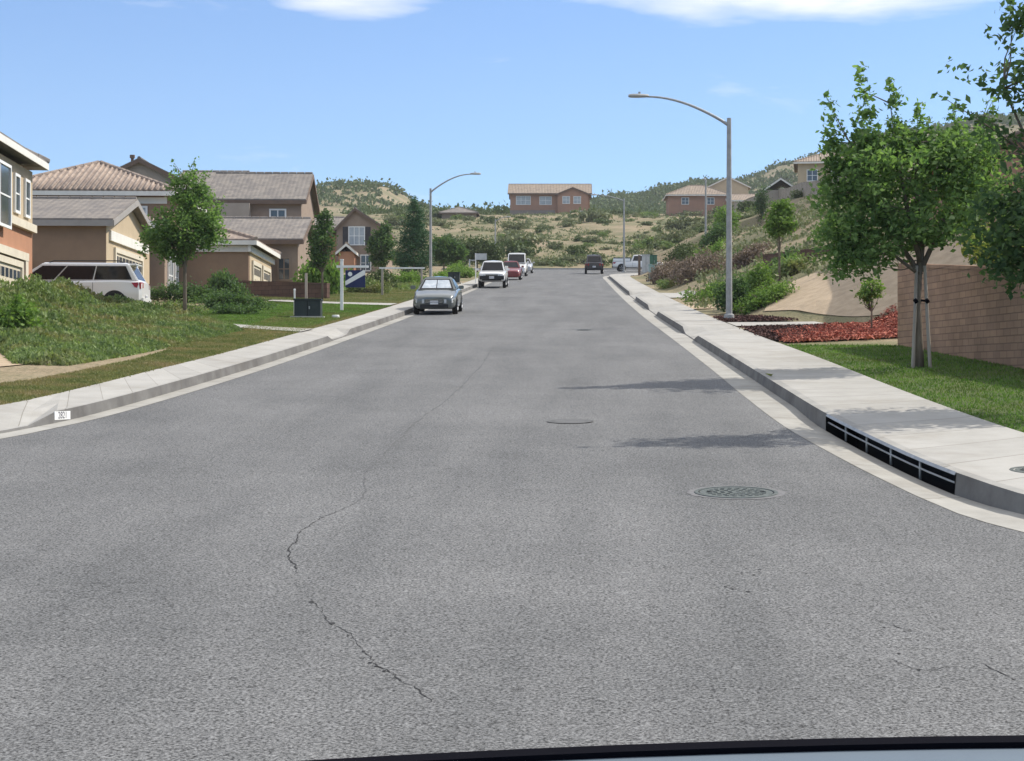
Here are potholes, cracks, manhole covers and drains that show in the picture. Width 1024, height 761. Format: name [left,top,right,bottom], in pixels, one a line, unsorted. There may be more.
crack [287,345,496,702]
drain grate [826,414,956,495]
manhole cover [687,486,786,500]
